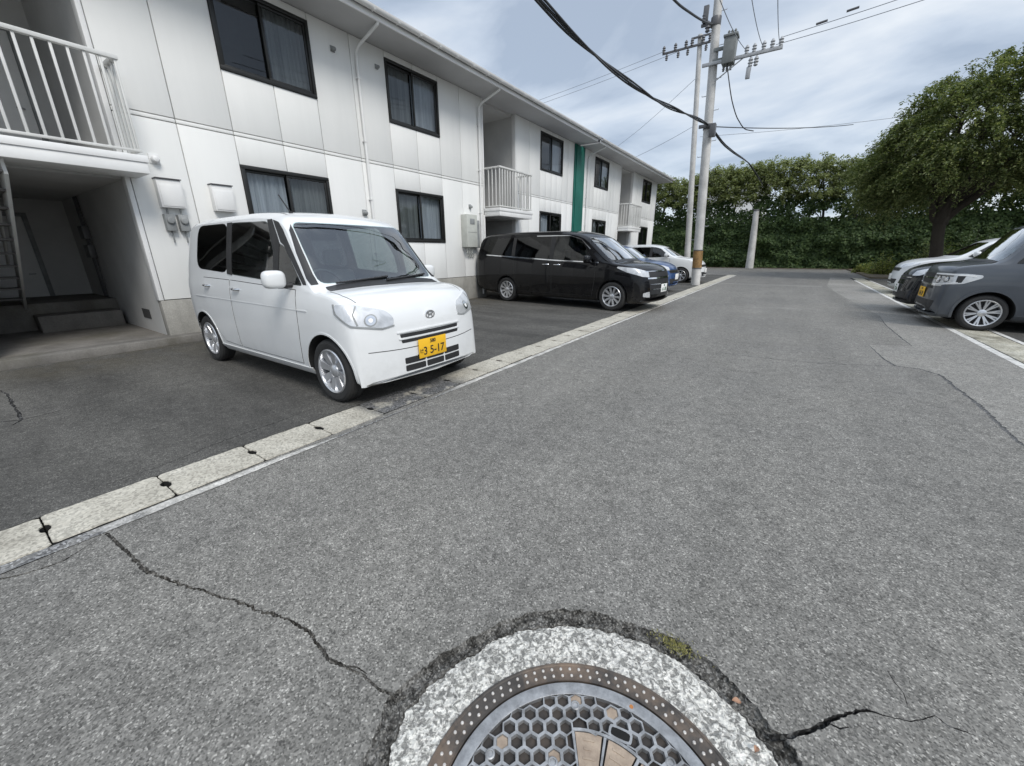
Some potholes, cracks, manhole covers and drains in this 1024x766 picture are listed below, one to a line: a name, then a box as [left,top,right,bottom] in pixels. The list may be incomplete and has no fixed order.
crack [0,390,68,425]
manhole cover [389,626,778,766]
crack [0,533,976,766]
